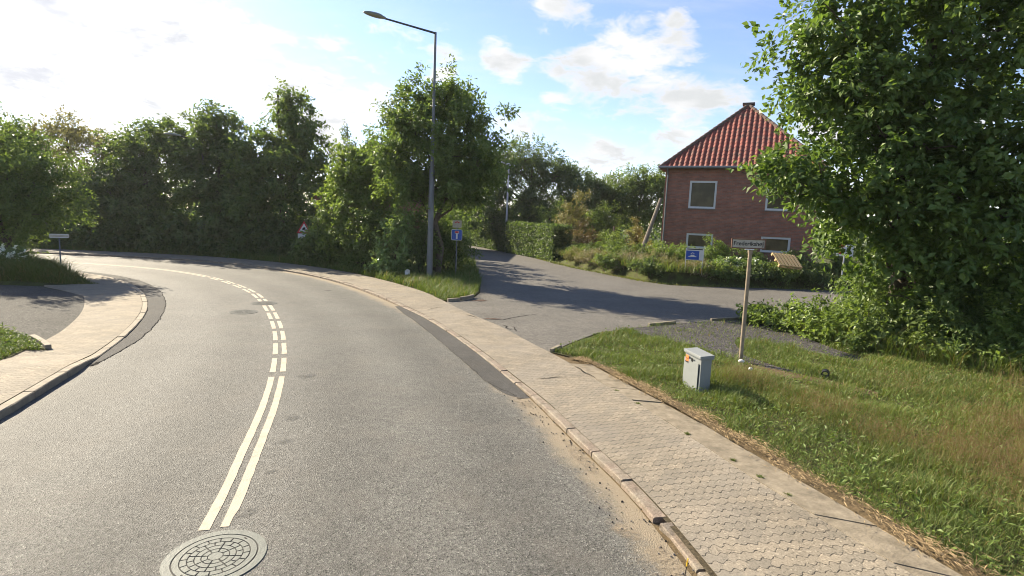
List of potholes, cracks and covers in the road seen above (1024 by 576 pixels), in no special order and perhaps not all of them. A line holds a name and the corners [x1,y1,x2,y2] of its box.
manhole cover [159,530,267,576]
